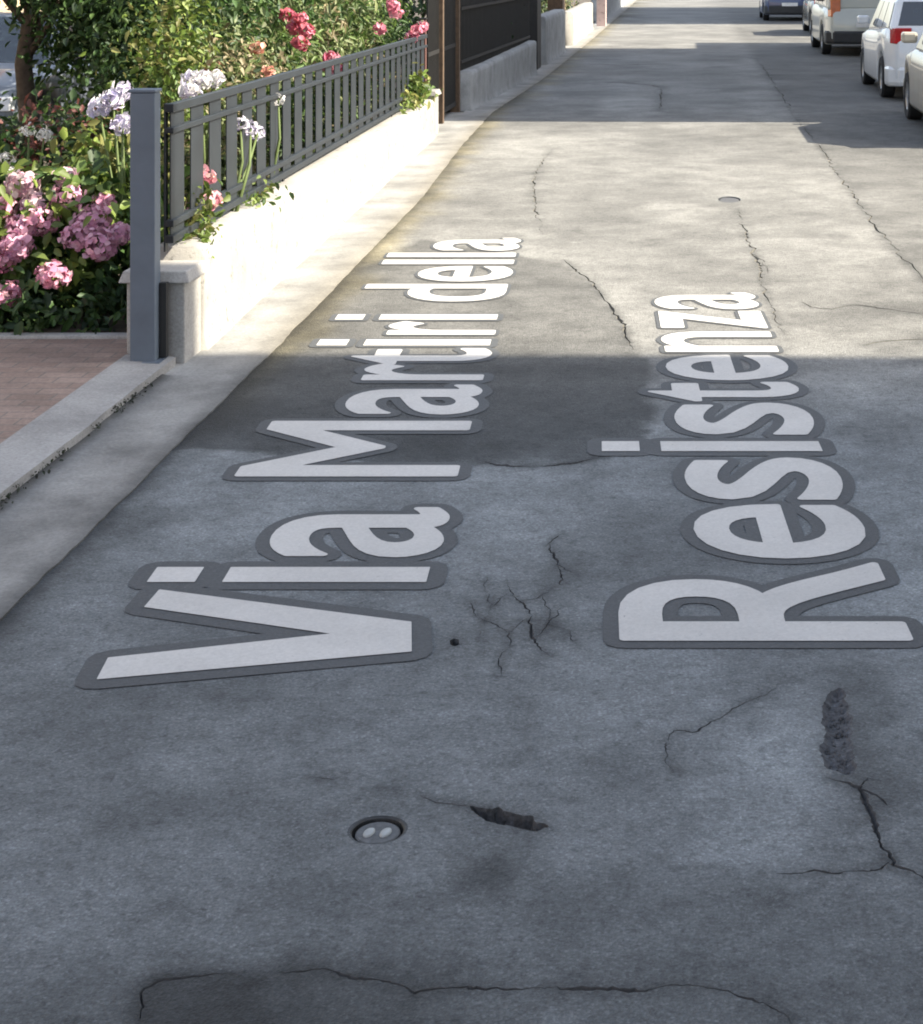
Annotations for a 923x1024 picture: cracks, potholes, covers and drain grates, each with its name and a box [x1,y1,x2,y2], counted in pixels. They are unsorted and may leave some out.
pothole [470,805,549,831]
crack [532,159,544,234]
crack [471,534,574,676]
crack [776,778,923,878]
crack [486,457,599,467]
crack [738,212,785,334]
manhole cover [347,815,408,844]
crack [664,684,777,772]
crack [564,260,633,348]
pothole [819,687,857,776]
